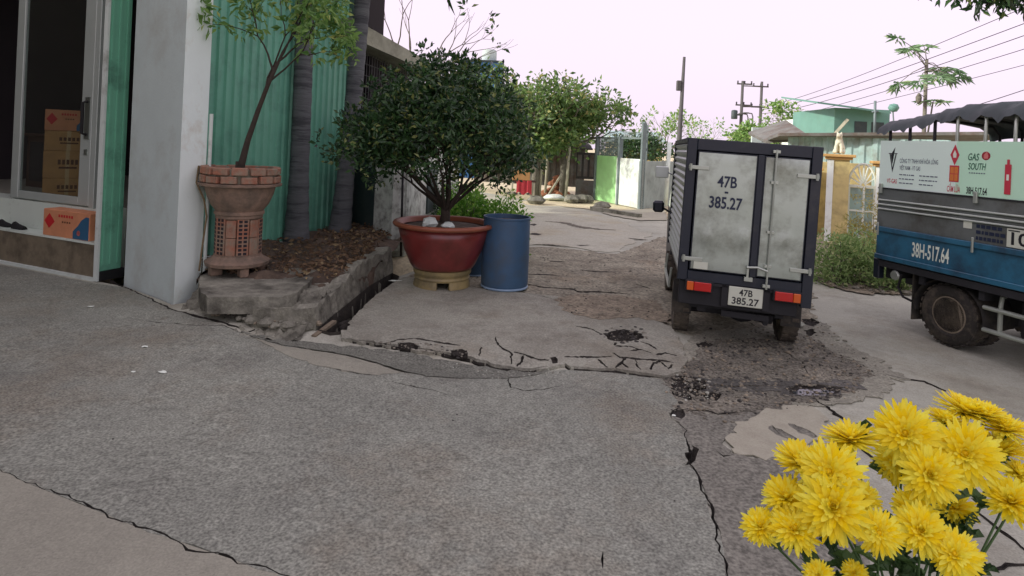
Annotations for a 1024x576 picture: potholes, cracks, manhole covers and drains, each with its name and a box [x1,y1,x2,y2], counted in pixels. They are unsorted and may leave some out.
pothole [671,376,706,400]
crack [670,408,754,576]
crack [352,326,677,391]
crack [110,280,266,341]
crack [528,244,650,294]
pothole [788,385,842,394]
pothole [606,329,644,341]
